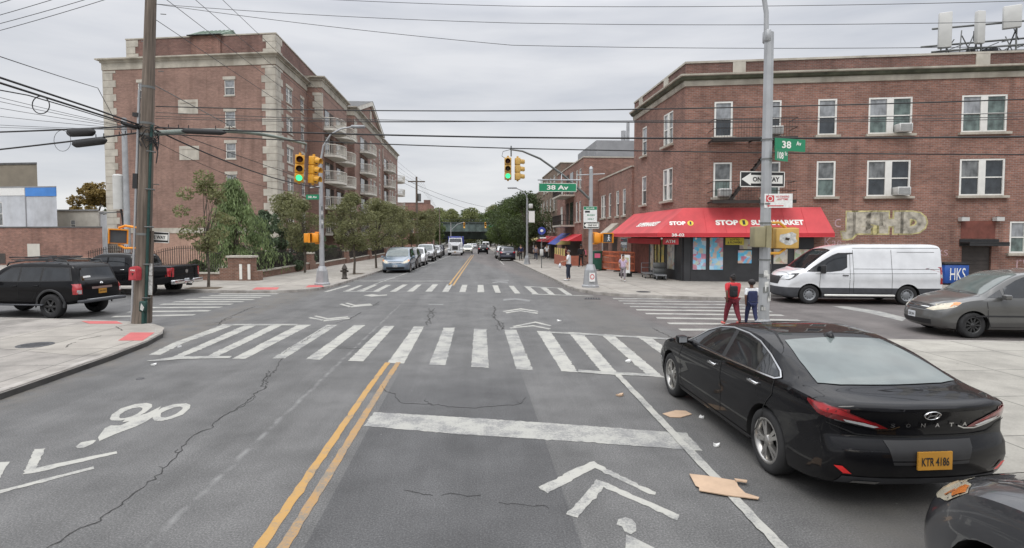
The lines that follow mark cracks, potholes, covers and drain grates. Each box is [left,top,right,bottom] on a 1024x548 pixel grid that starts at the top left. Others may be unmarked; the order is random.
crack [47,312,361,548]
crack [385,390,525,408]
crack [407,490,548,508]
